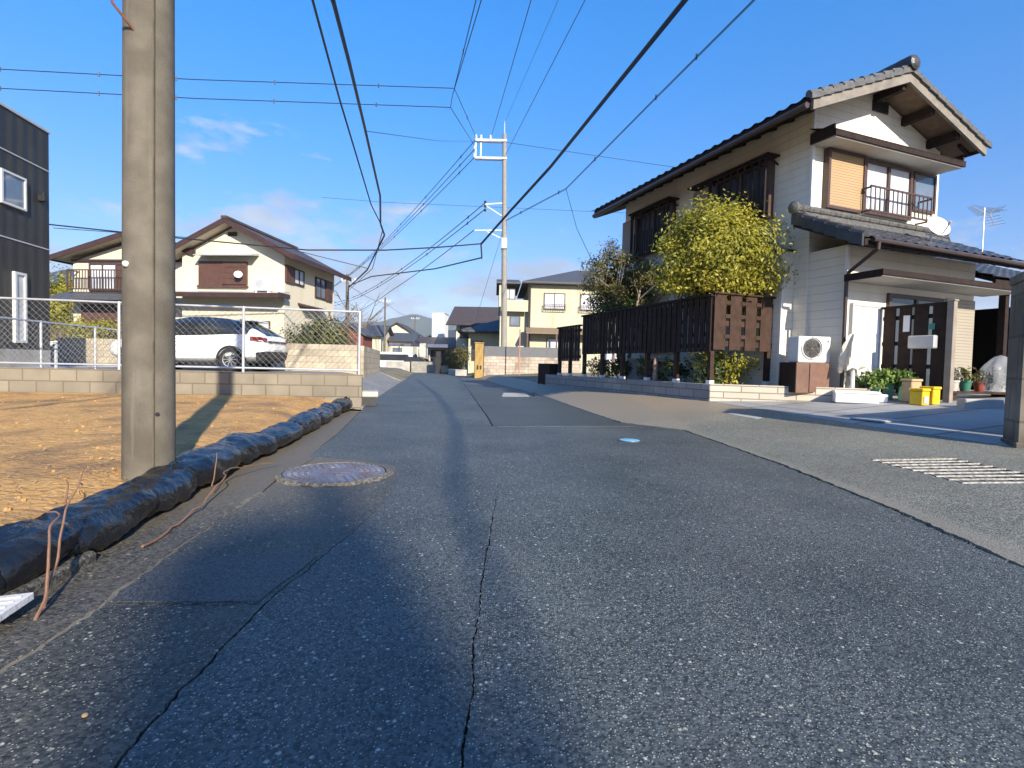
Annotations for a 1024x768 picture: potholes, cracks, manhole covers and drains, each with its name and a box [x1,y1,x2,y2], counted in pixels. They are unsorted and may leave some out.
manhole cover [273,462,394,487]
crack [461,506,496,768]
drain grate [869,458,1024,484]
